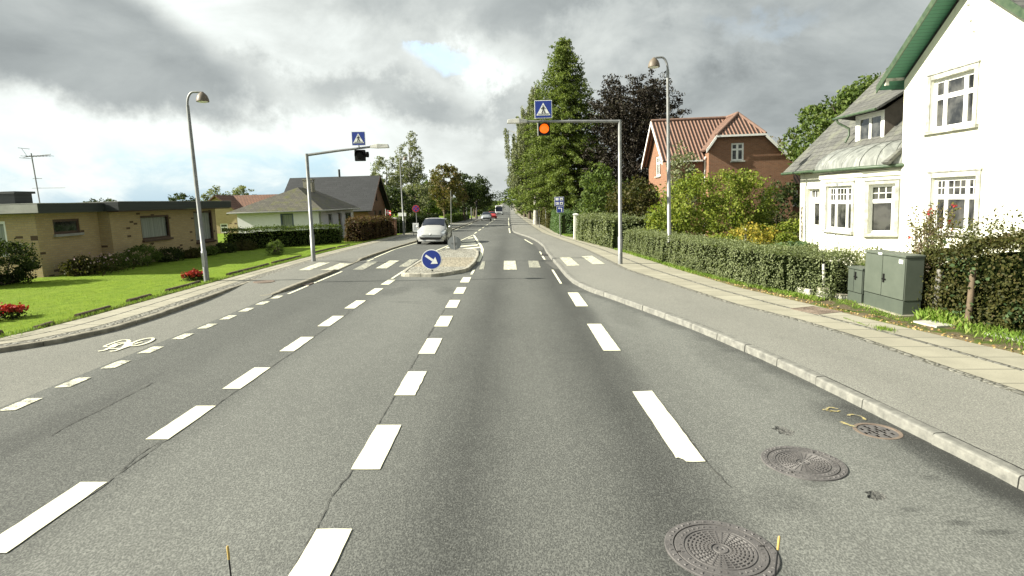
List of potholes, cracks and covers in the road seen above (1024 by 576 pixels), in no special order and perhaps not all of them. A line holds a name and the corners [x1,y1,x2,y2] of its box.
manhole cover [761,446,848,481]
pothole [865,491,887,501]
manhole cover [664,520,780,576]
drain grate [853,423,903,440]
pothole [771,426,795,436]
